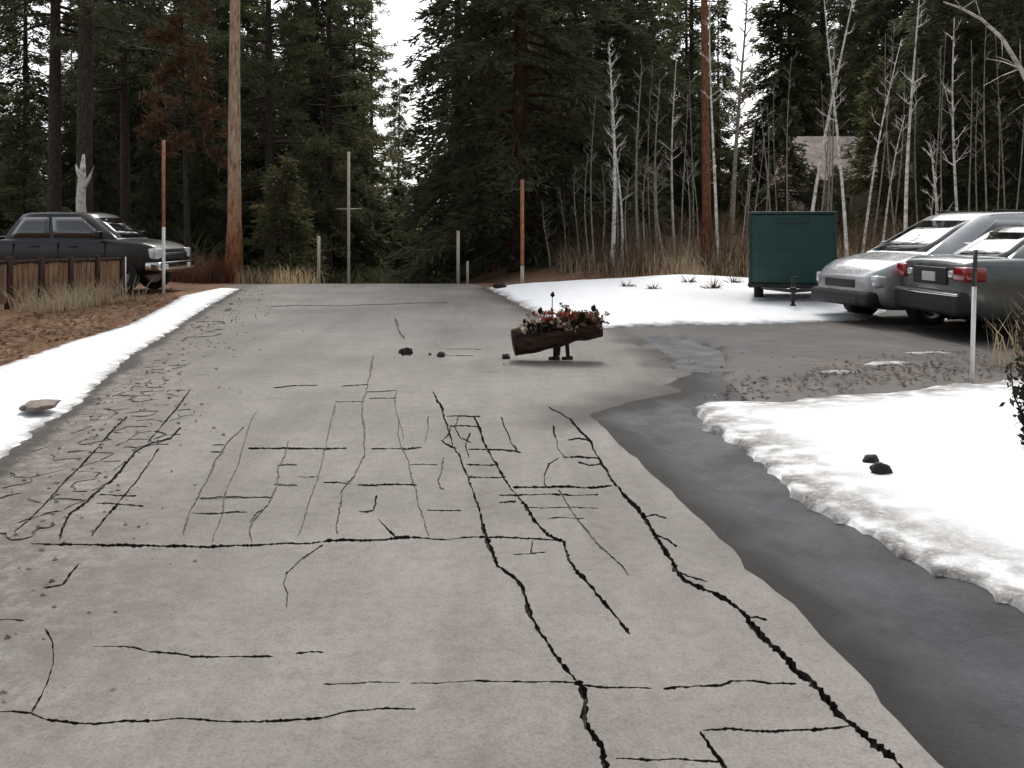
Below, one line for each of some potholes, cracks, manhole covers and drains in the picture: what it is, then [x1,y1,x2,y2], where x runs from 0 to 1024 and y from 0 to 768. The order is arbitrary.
crack [0,353,903,768]
